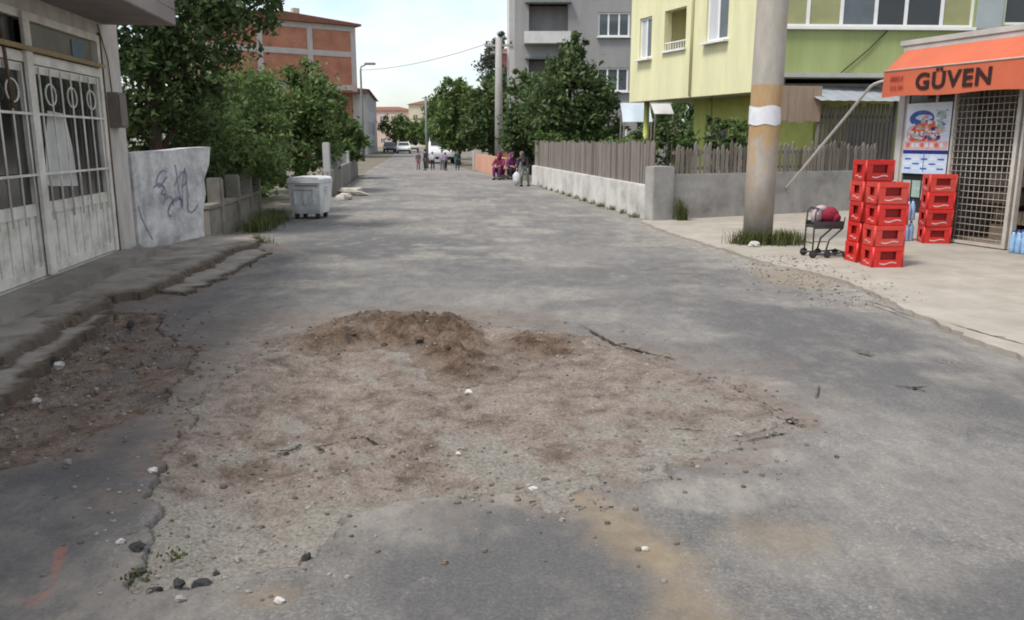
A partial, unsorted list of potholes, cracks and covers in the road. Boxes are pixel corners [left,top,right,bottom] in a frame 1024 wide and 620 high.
pothole [127,319,795,593]
pothole [0,314,196,471]
crack [582,326,675,359]
